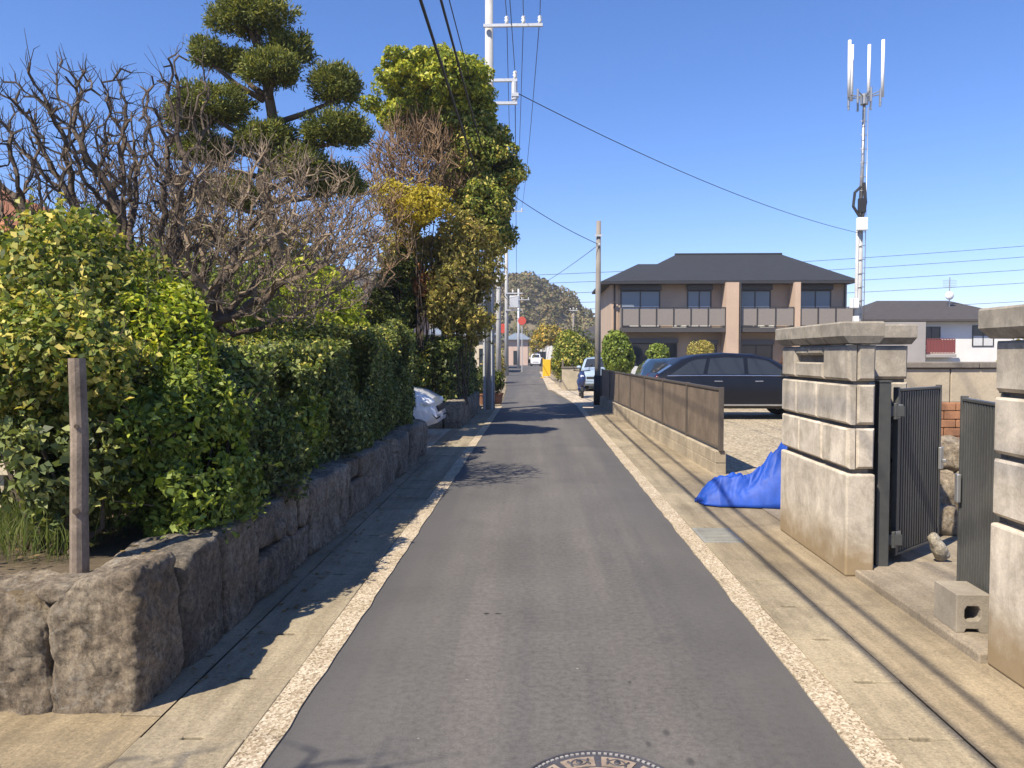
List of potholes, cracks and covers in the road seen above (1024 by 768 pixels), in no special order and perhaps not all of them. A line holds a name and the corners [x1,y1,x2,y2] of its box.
manhole cover [530,750,664,768]
